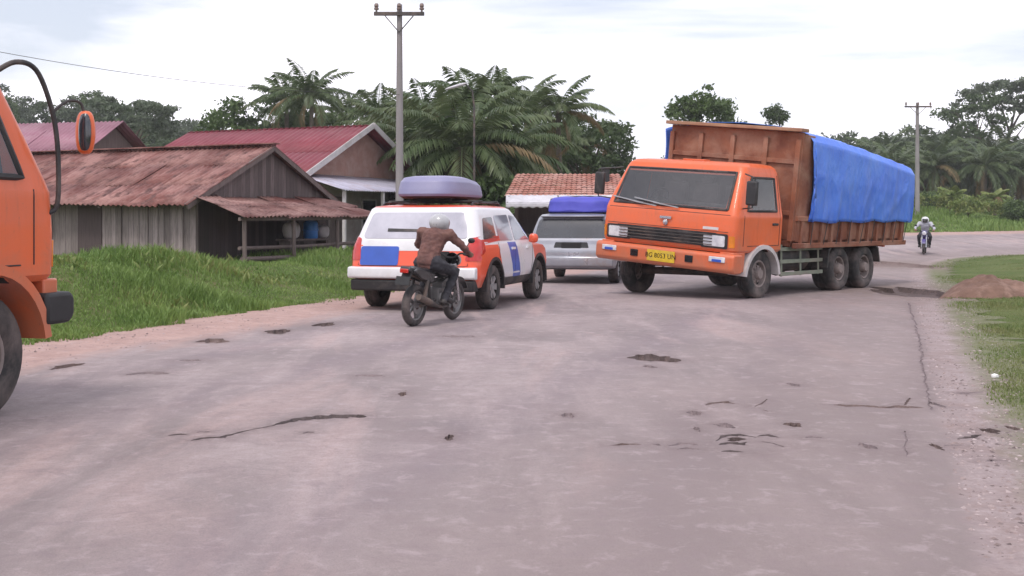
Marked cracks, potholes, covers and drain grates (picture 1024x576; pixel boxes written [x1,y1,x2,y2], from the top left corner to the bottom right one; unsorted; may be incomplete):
crack [168,414,367,441]
crack [716,434,783,452]
pothole [869,287,945,298]
pothole [627,354,681,362]
crack [837,303,933,410]
